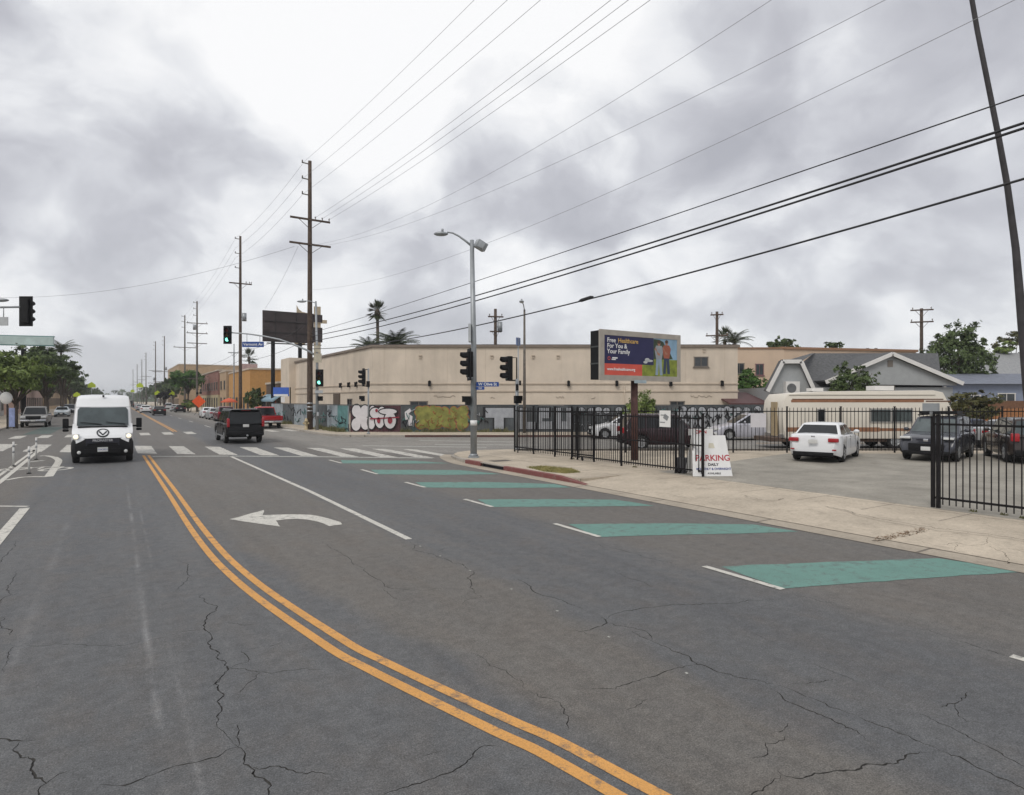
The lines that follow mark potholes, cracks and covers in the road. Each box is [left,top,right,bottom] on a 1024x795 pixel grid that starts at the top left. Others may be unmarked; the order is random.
crack [573,599,1024,795]
crack [383,745,493,795]
crack [2,593,325,795]
